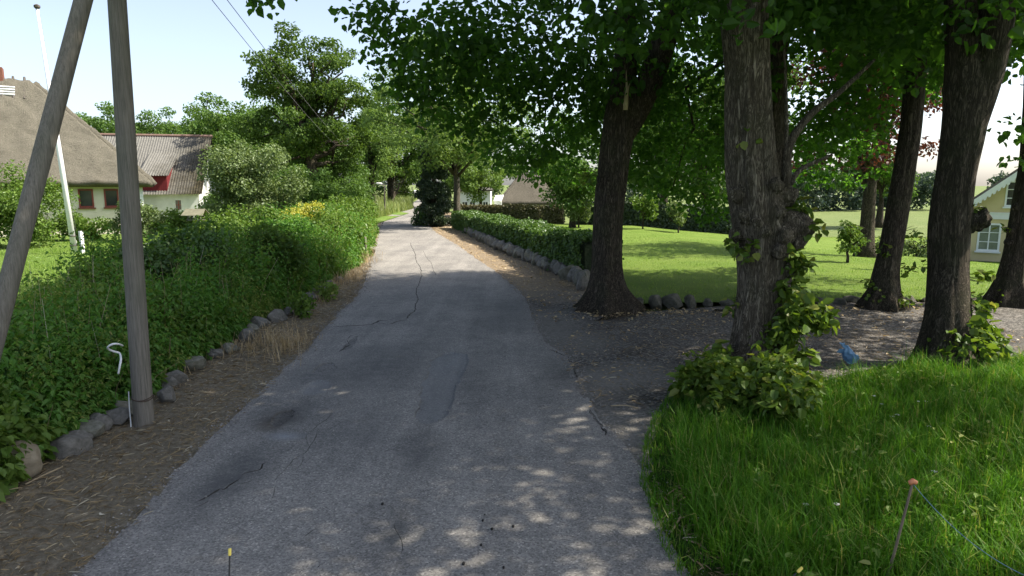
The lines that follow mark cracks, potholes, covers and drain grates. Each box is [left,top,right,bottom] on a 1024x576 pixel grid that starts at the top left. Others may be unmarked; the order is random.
crack [336,244,436,352]
crack [192,411,344,507]
